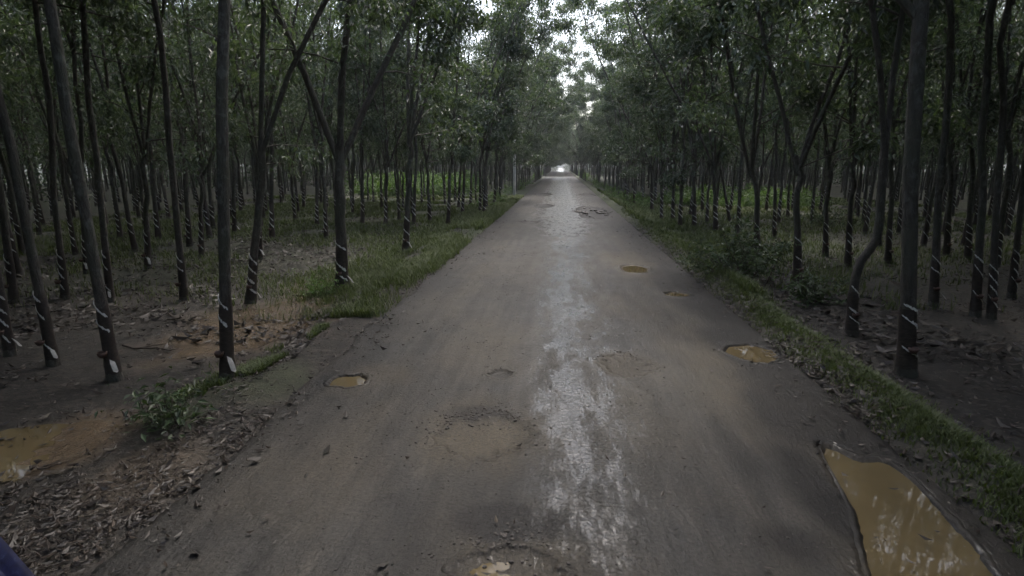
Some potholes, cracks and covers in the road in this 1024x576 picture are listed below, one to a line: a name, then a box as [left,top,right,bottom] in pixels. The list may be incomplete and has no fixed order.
pothole [718,342,782,365]
pothole [572,205,613,219]
pothole [816,438,1011,576]
pothole [411,403,552,471]
pothole [322,372,372,389]
pothole [482,367,518,380]
pothole [618,263,651,274]
pothole [573,348,665,378]
pothole [423,522,590,576]
